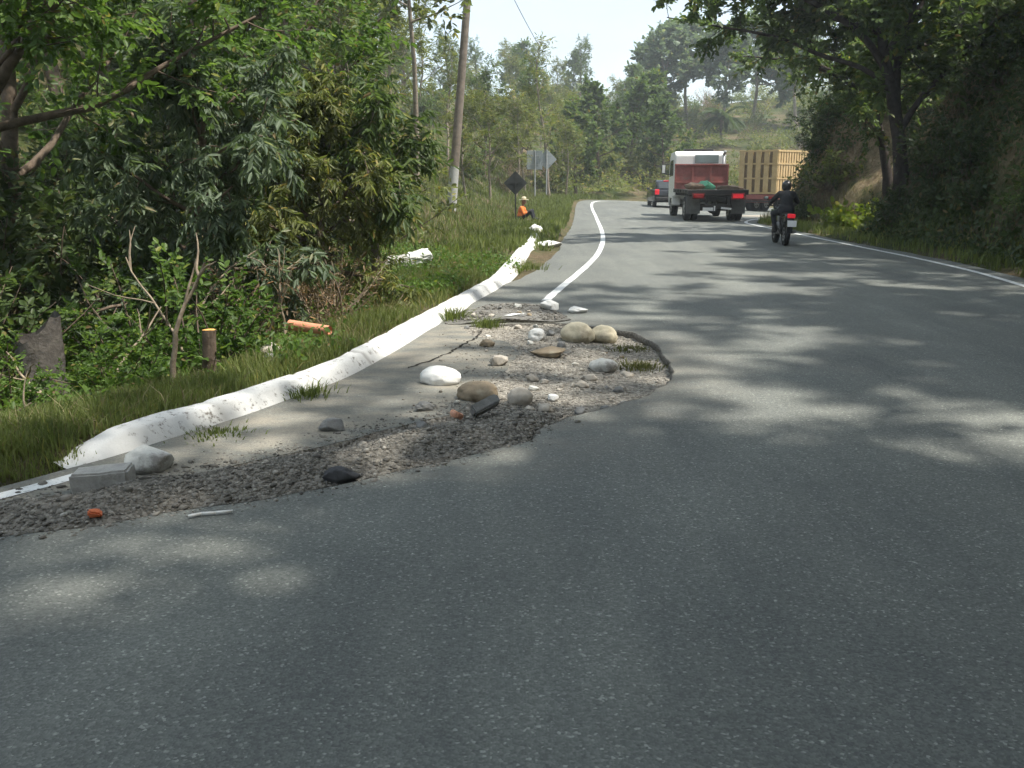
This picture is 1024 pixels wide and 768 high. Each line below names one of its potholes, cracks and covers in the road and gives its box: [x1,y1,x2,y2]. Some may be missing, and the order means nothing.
crack [408,329,482,368]
pothole [0,323,675,537]
